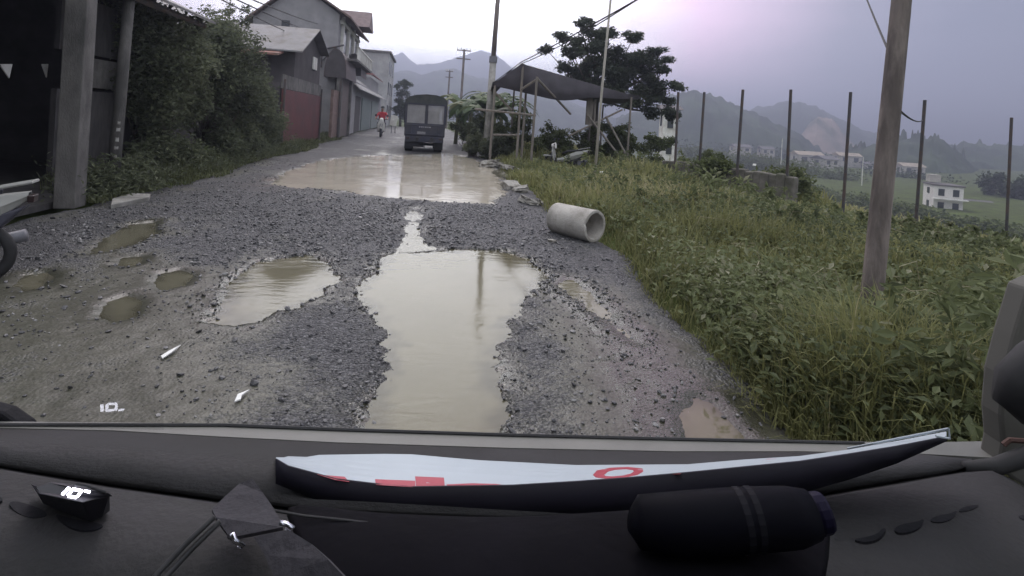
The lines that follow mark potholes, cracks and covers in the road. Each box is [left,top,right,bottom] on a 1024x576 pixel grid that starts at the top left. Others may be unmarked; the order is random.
pothole [372,205,452,257]
pothole [338,245,558,434]
pothole [87,249,169,272]
pothole [185,250,355,332]
pothole [62,217,175,258]
pothole [258,152,516,206]
pothole [70,287,171,329]
pothole [0,265,83,296]
pothole [129,263,218,294]
